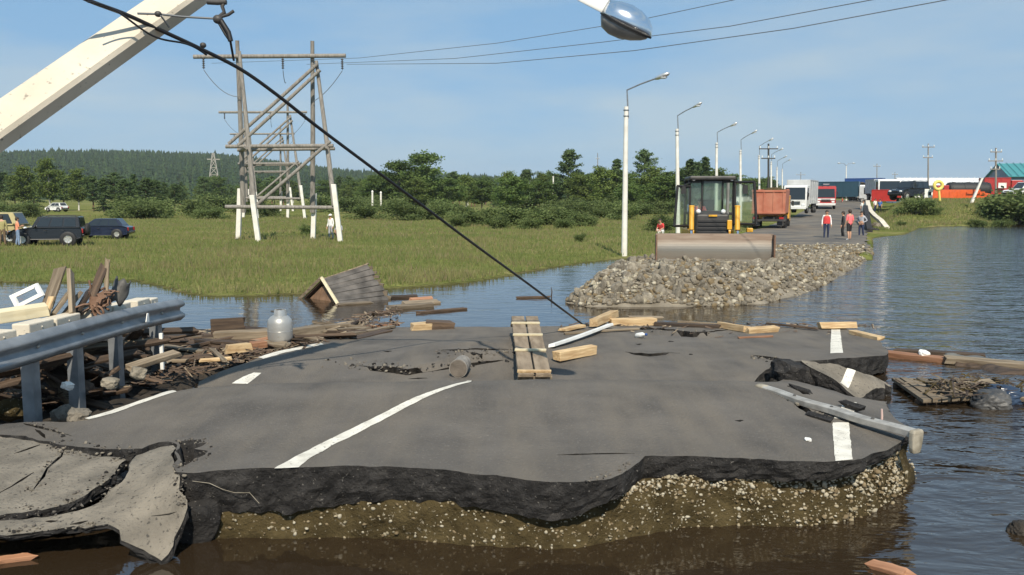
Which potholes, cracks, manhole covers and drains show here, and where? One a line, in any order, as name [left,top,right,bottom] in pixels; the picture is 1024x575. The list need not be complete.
crack [0,423,71,493]
